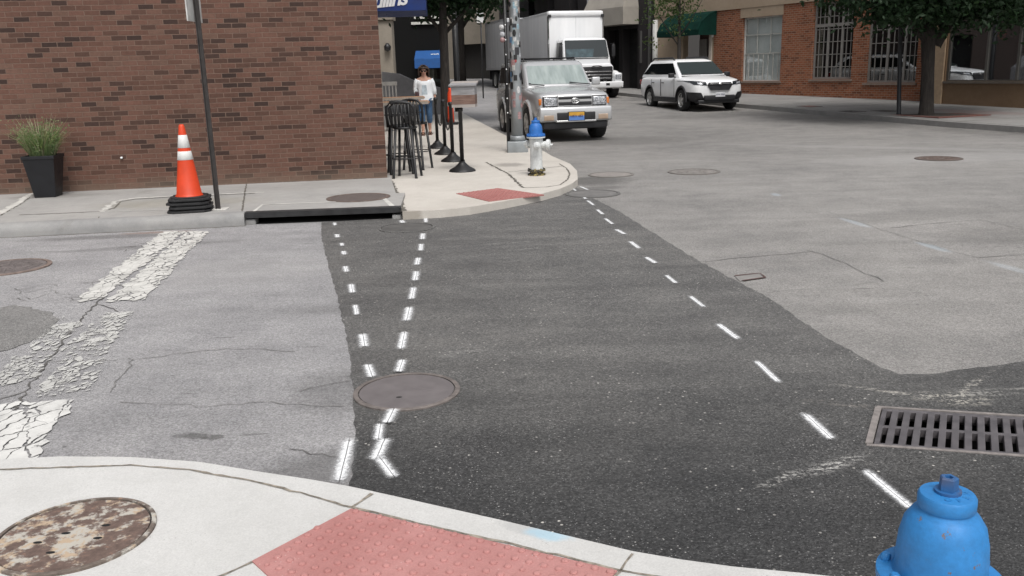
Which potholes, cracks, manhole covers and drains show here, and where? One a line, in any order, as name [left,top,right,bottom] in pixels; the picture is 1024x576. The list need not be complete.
manhole cover [353,372,460,412]
manhole cover [565,189,621,198]
manhole cover [0,497,157,576]
manhole cover [378,222,435,233]
manhole cover [0,258,52,276]
utility cover [735,273,766,281]
crack [0,234,349,448]
drain grate [865,406,1024,457]
